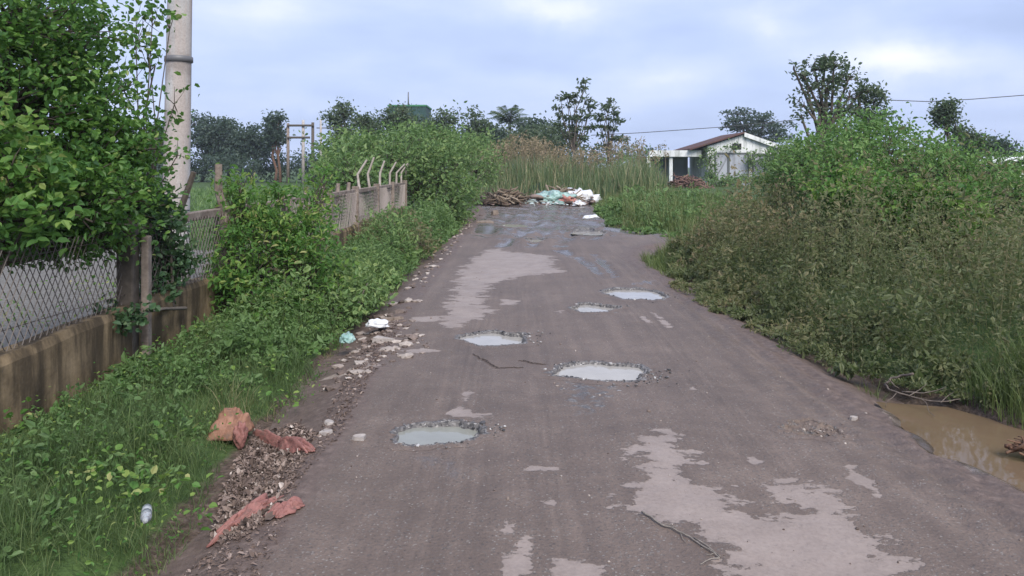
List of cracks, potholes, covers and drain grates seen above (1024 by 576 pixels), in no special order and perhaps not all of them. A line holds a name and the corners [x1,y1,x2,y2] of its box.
pothole [375,417,506,451]
pothole [530,358,690,387]
crack [472,353,548,368]
pothole [442,328,551,349]
pothole [589,286,689,303]
pothole [561,301,630,315]
